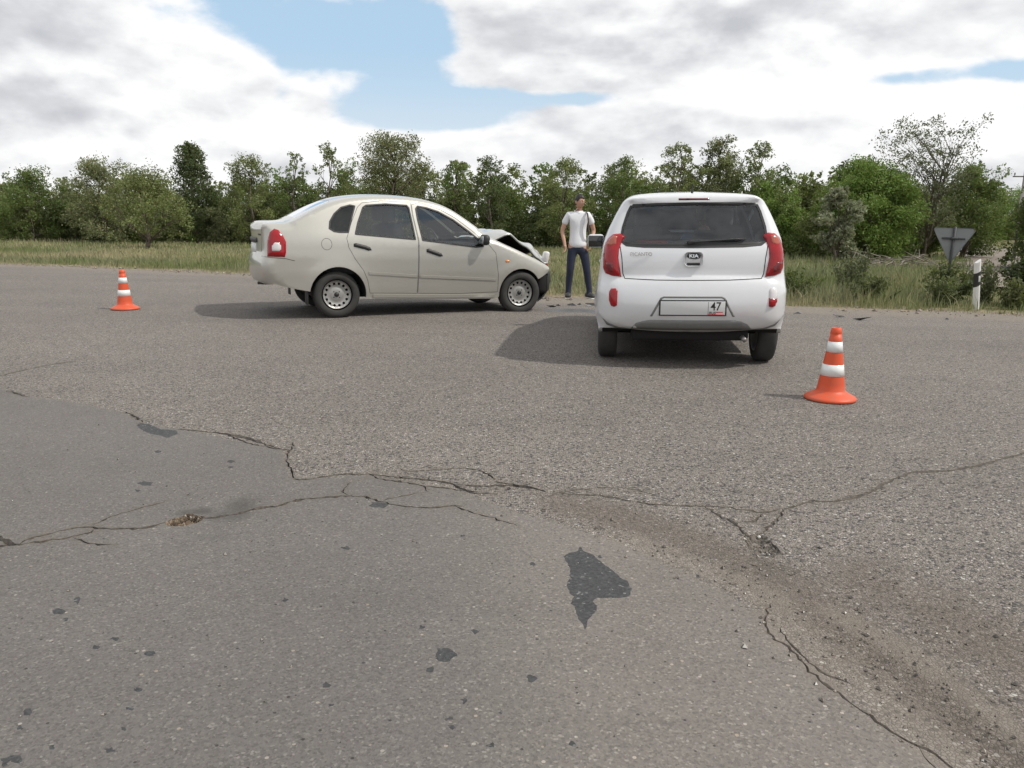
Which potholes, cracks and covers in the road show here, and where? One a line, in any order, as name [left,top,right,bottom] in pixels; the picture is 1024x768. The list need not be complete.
crack [762,602,953,768]
crack [178,429,1024,535]
crack [0,501,165,547]
pothole [166,514,206,527]
pothole [743,533,784,559]
